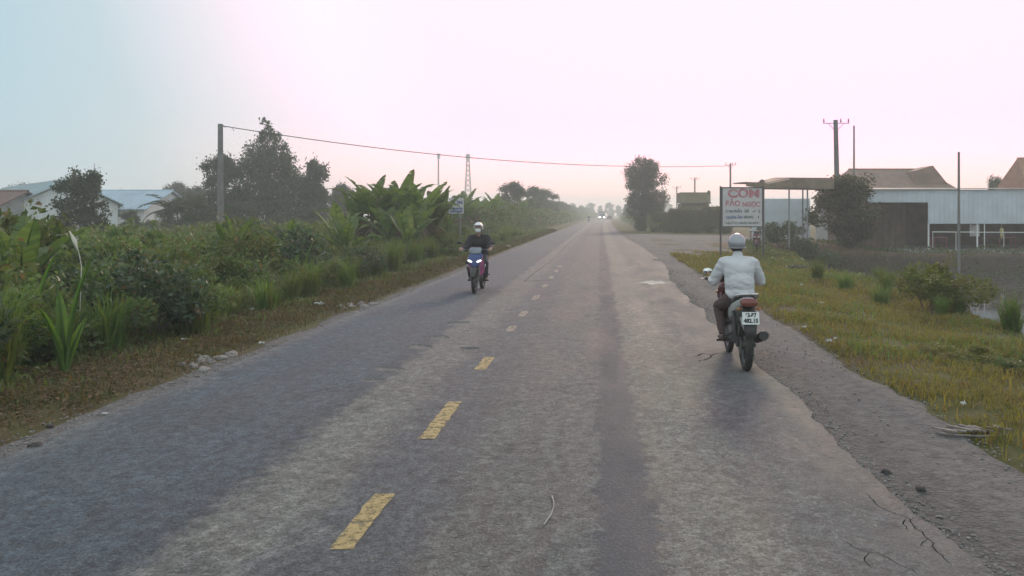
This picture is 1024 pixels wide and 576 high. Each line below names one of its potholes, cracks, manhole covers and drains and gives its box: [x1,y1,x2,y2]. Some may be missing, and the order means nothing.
crack [841,494,952,576]
